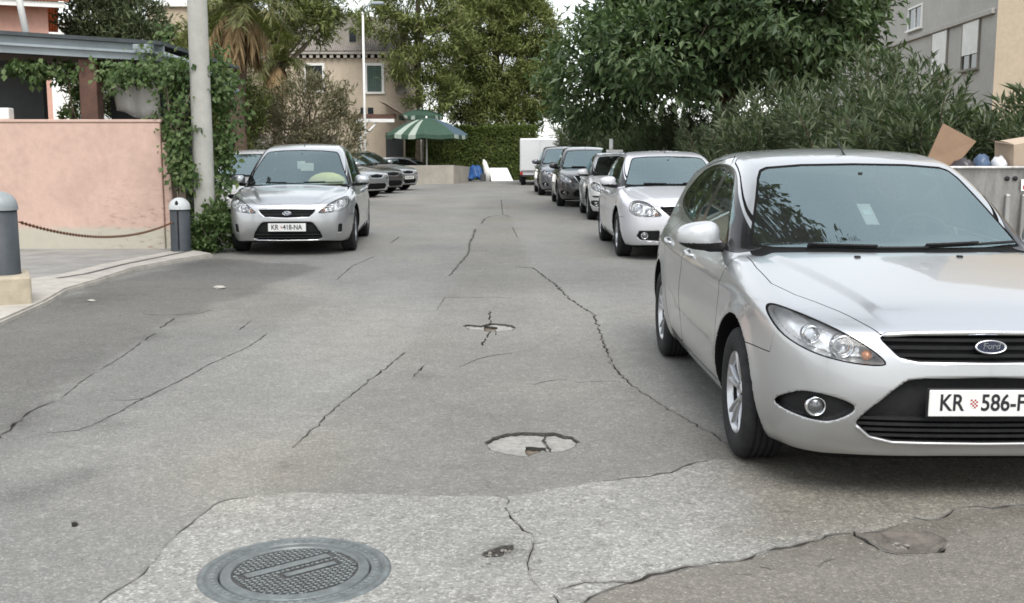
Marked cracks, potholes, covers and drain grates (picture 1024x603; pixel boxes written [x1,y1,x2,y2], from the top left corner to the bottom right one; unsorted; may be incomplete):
crack [495,495,1019,603]
pothole [463,311,516,346]
crack [448,201,517,276]
crack [292,352,425,448]
crack [516,266,729,445]
pothole [482,545,514,557]
pothole [876,530,947,554]
crack [0,310,268,438]
manhole cover [196,537,391,603]
pothole [485,432,580,456]
